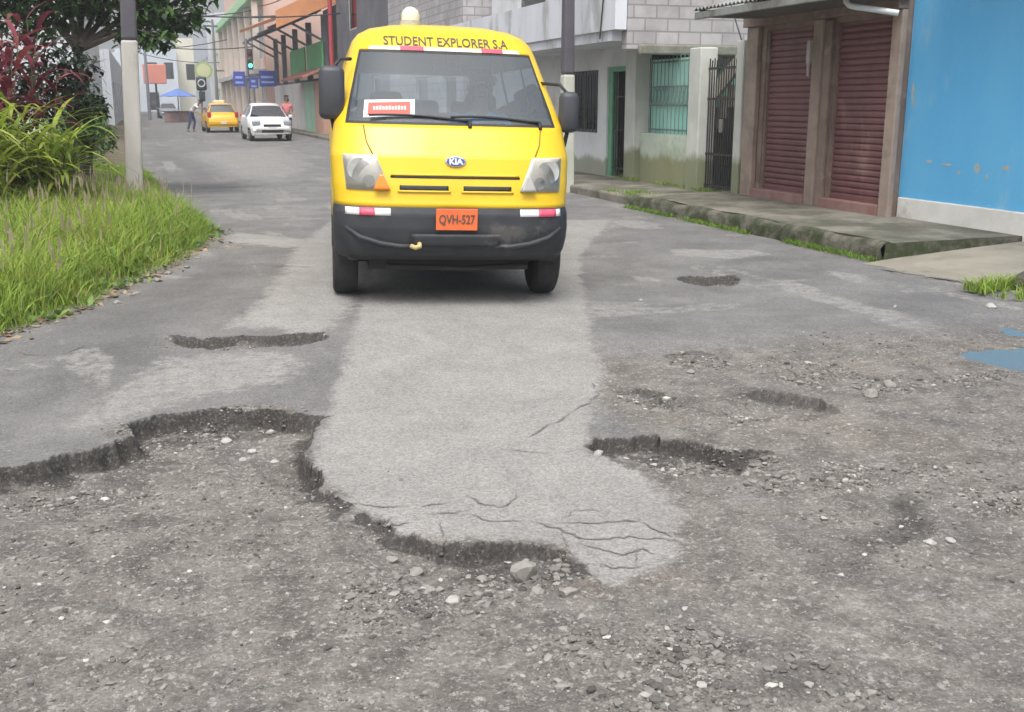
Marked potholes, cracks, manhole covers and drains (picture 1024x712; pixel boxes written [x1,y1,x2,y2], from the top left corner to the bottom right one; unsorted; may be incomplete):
pothole [616,388,675,416]
pothole [671,274,744,287]
crack [505,383,601,453]
pothole [151,331,332,351]
pothole [708,389,844,424]
crack [356,493,686,568]
pothole [582,433,811,481]
pothole [0,407,358,535]
